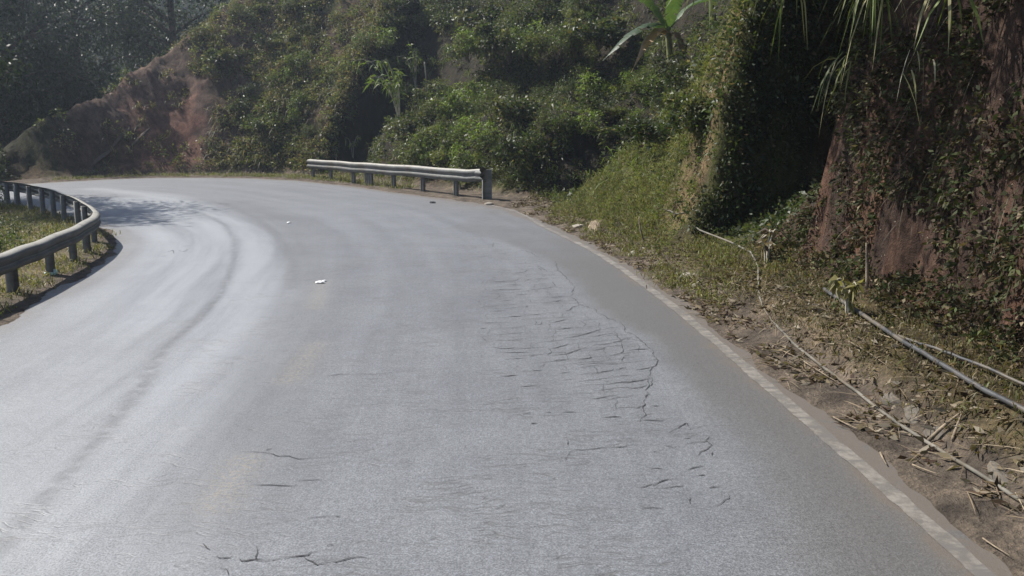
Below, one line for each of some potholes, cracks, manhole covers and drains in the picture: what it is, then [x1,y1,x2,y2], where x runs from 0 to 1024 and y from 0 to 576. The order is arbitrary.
crack [480,243,730,509]
crack [243,448,330,486]
crack [203,516,368,574]
